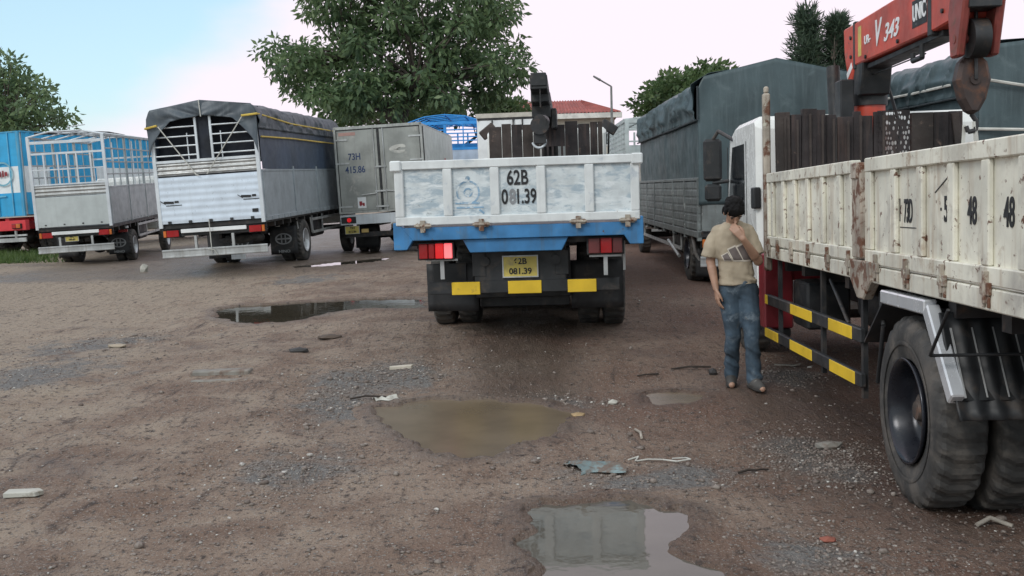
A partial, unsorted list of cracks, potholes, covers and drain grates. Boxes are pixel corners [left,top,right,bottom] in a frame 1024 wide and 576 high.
pothole [484,488,775,576]
pothole [199,296,428,326]
pothole [351,394,598,467]
pothole [623,387,724,410]
